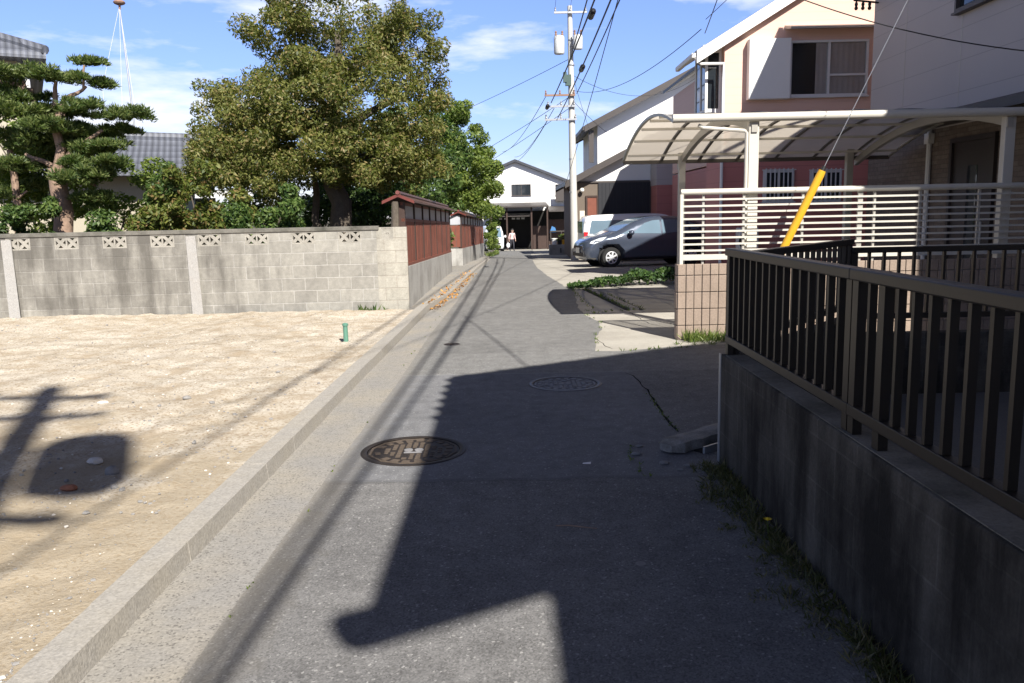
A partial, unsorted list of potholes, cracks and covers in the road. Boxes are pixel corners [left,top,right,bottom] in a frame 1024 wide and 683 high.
crack [627,373,679,432]
manhole cover [360,436,466,466]
manhole cover [528,376,602,391]
